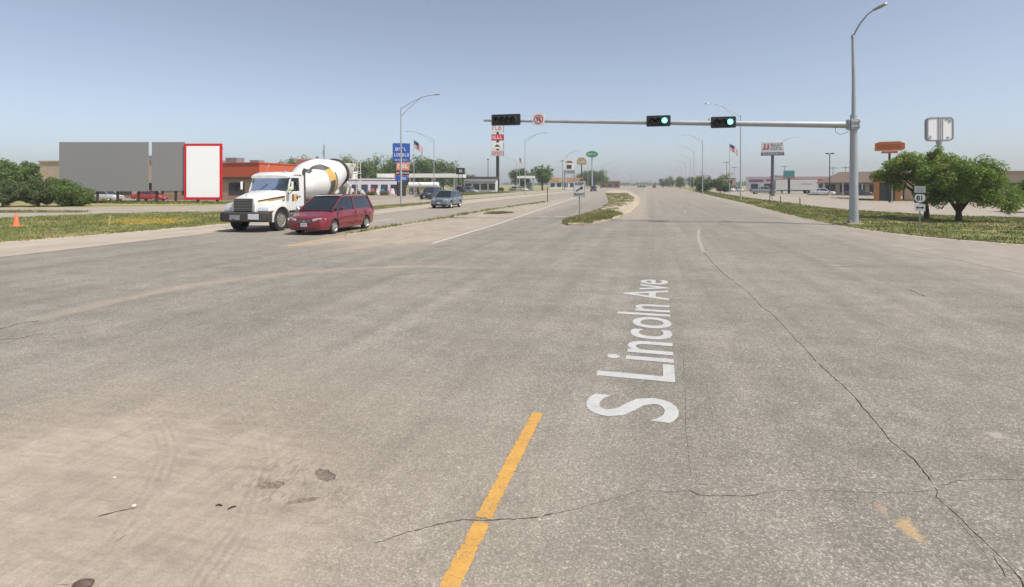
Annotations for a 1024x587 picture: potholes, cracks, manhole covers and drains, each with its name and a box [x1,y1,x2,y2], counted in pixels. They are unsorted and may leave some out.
pothole [315,468,336,482]
crack [375,252,1024,587]
